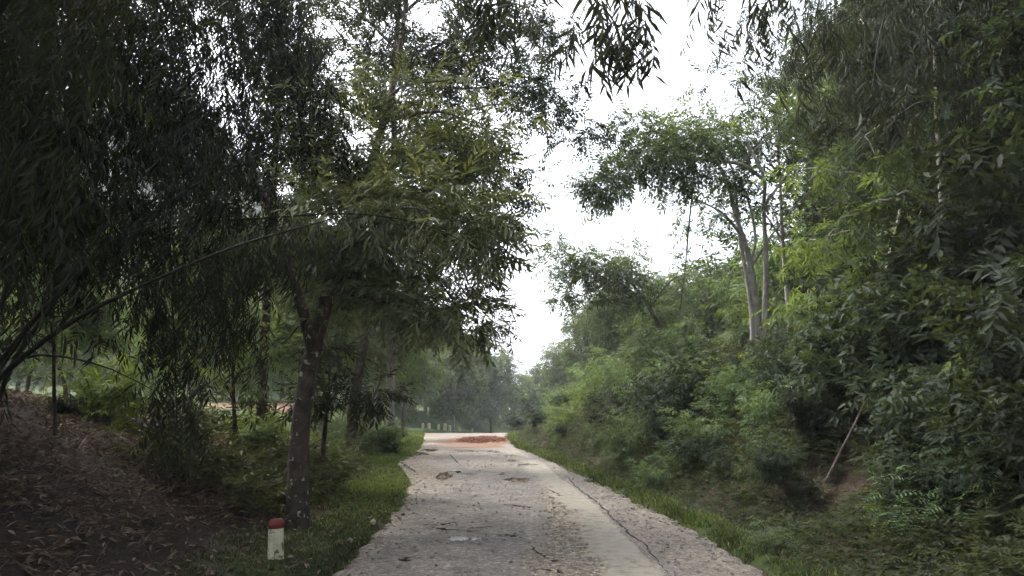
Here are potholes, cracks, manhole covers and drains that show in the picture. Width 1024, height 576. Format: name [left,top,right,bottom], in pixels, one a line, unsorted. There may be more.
pothole [430,471,459,482]
crack [427,473,676,576]
crack [448,450,495,465]
